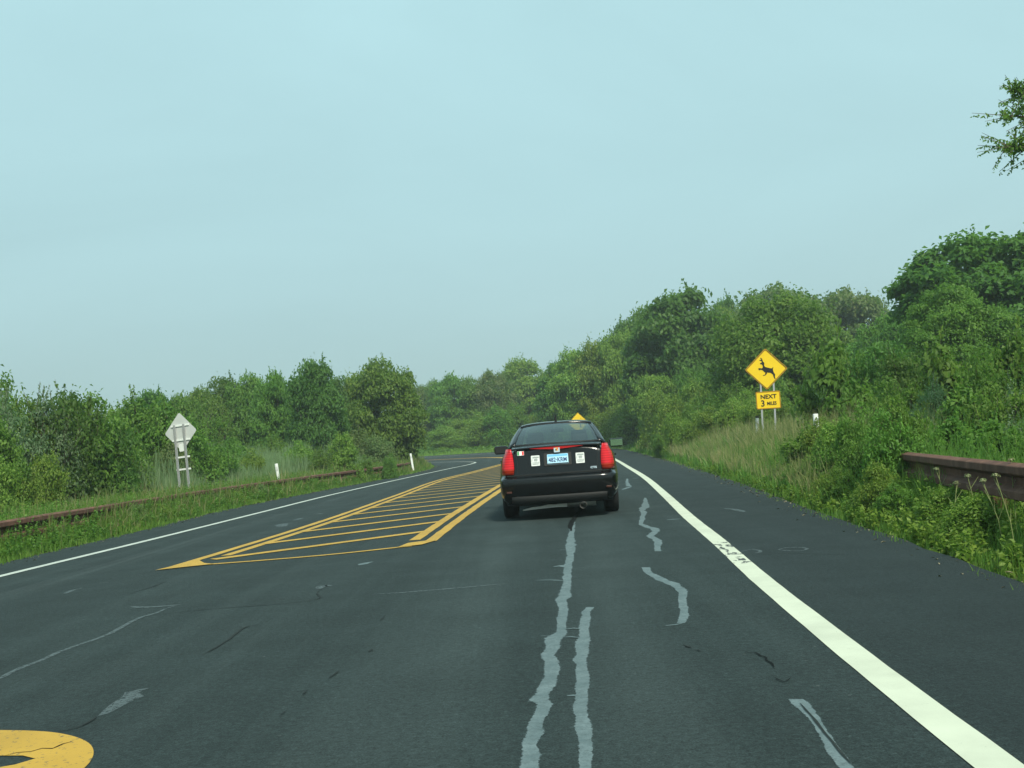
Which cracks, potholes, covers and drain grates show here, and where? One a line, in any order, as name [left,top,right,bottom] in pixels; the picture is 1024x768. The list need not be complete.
crack [0,581,332,679]
